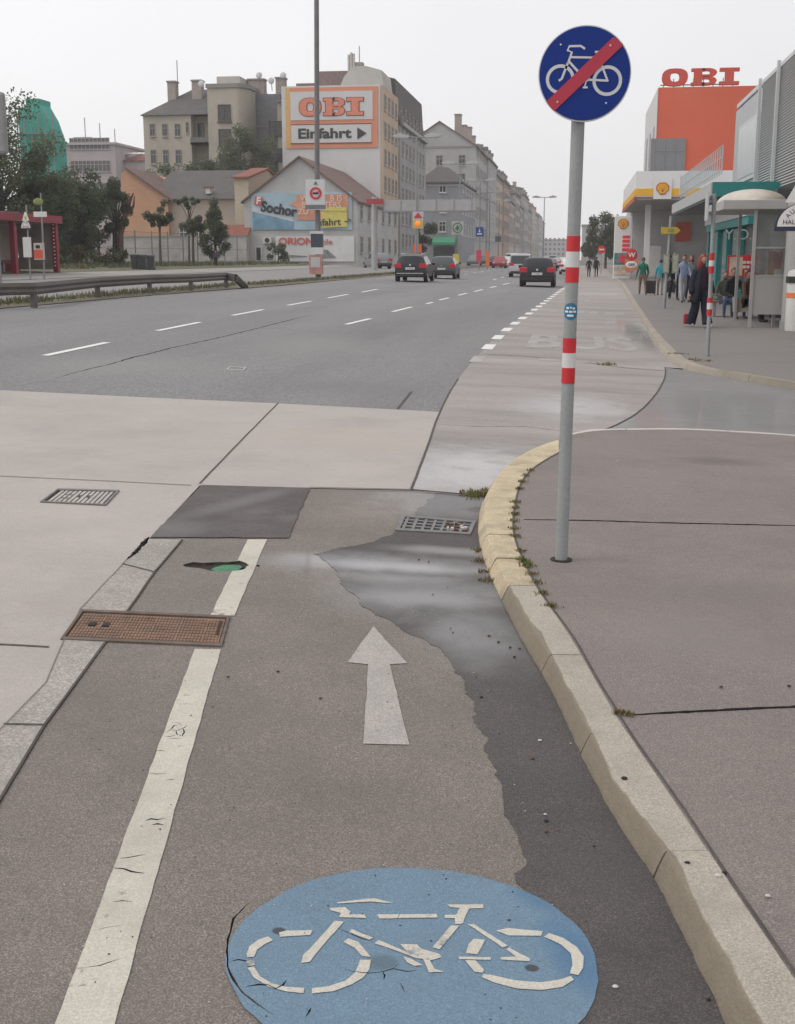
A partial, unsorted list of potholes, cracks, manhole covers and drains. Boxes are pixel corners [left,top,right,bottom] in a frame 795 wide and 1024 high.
drain grate [395,514,476,535]
manhole cover [60,609,230,655]
crack [345,964,416,992]
crack [226,901,286,1006]
pothole [184,561,248,572]
